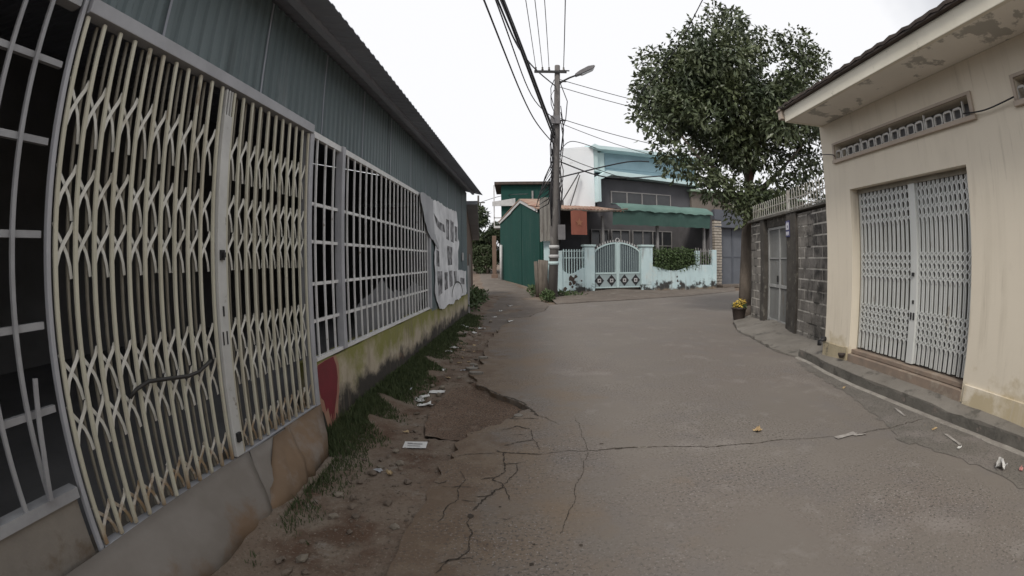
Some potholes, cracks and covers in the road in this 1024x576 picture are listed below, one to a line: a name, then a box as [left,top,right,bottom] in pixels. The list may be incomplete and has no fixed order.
pothole [425,385,522,440]
crack [435,385,828,573]
